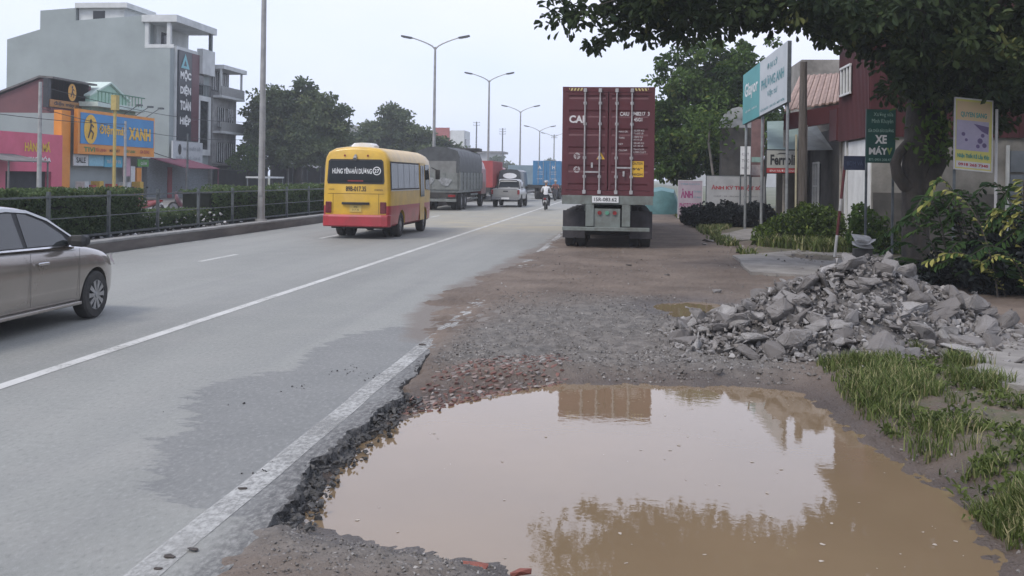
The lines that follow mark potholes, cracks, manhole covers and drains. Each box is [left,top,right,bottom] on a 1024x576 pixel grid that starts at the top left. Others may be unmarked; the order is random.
pothole [271,354,1017,576]
pothole [650,301,722,317]
